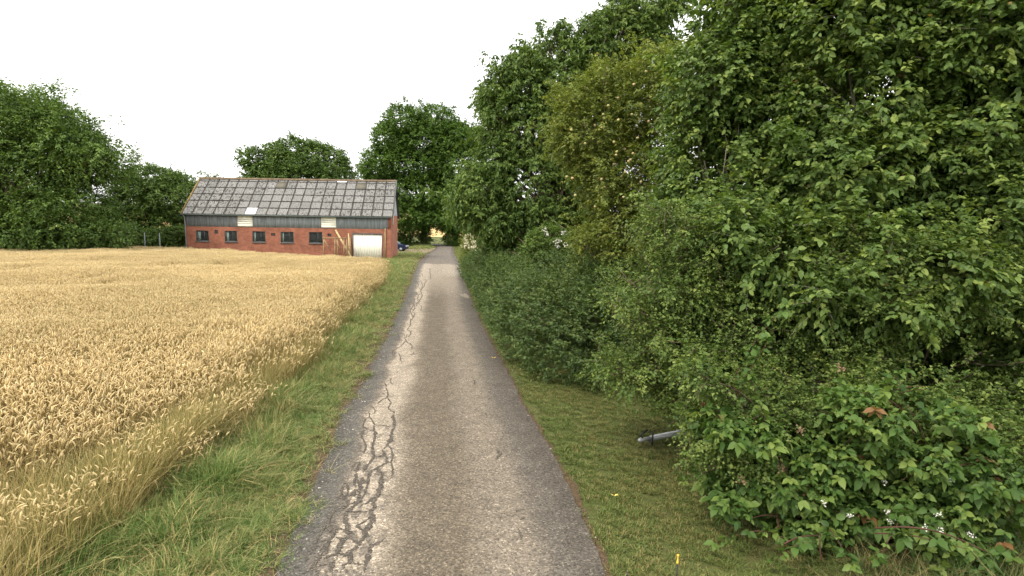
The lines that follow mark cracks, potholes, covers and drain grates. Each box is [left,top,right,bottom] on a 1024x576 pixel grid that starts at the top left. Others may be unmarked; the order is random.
crack [305,271,431,573]
